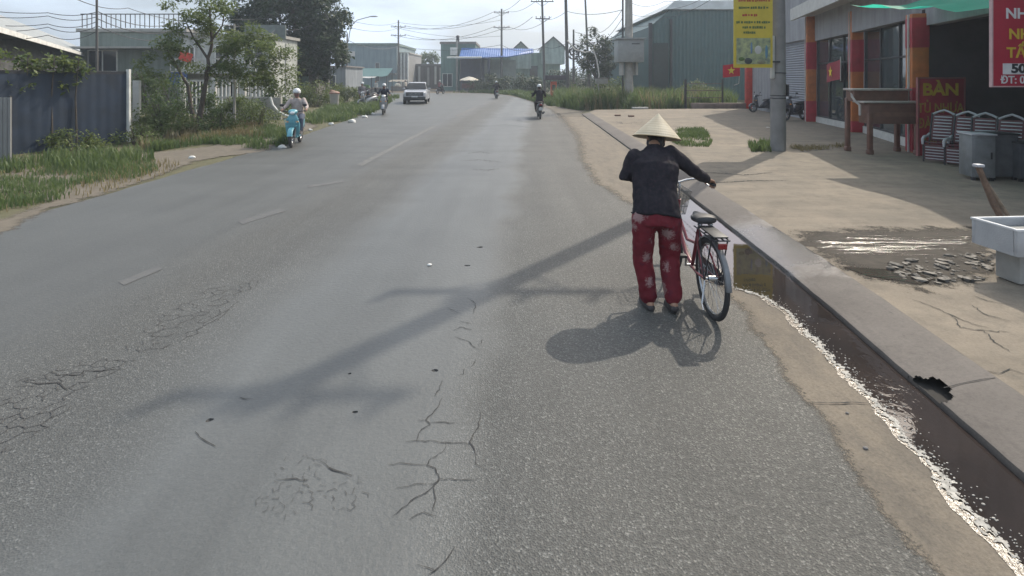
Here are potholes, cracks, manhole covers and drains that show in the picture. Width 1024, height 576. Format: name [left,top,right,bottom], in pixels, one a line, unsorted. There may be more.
crack [391,382,483,519]
crack [0,278,262,452]
crack [256,454,369,517]
crack [888,295,1013,348]
